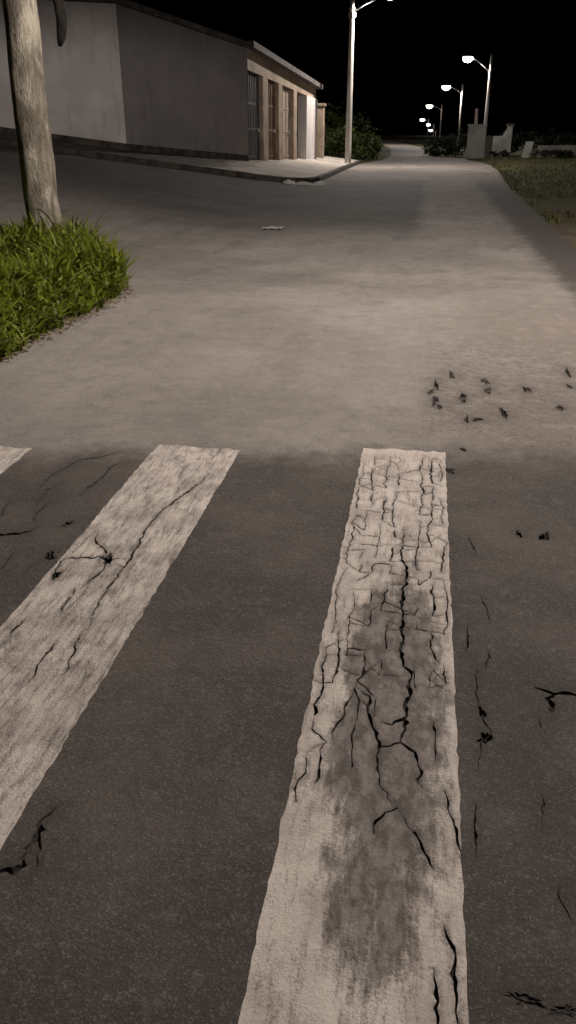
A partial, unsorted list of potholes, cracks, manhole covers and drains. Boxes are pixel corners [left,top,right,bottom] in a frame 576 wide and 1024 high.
crack [34,478,204,676]
crack [0,454,116,573]
crack [535,687,576,730]
crack [0,806,57,875]
crack [465,597,492,768]
crack [294,459,448,867]
crack [433,928,458,1024]
crack [445,793,478,857]
